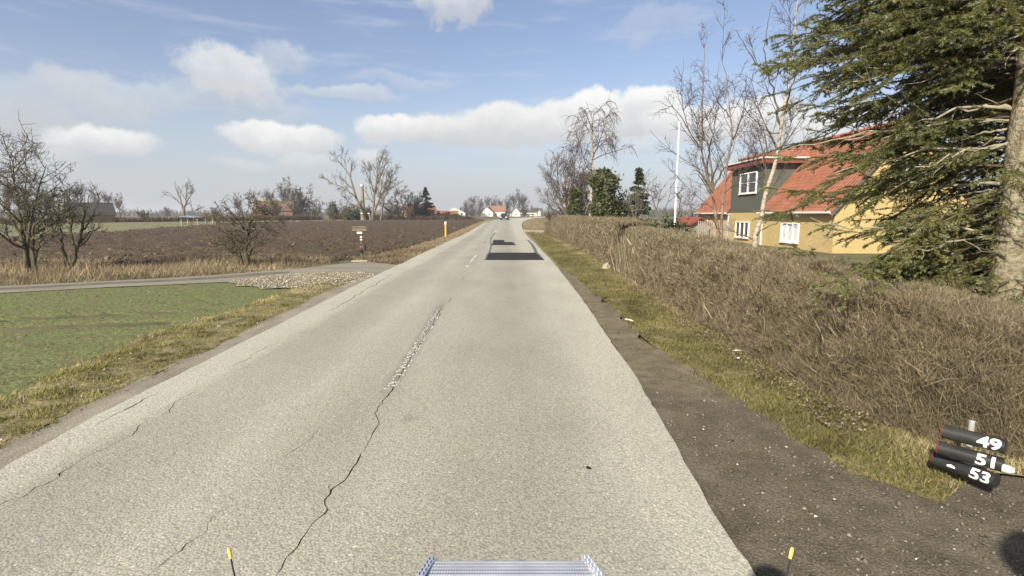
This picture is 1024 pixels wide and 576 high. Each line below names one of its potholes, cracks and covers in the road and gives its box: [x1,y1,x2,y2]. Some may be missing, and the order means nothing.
crack [148,503,250,576]
crack [2,392,193,504]
crack [276,297,452,576]
